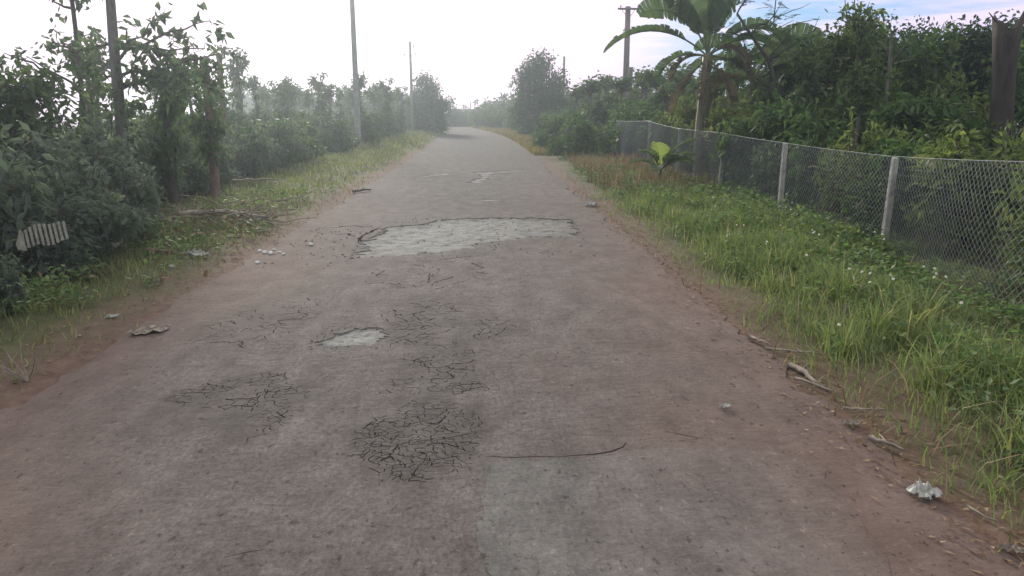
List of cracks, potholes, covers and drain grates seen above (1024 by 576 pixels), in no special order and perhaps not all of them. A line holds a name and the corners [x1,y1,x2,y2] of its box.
crack [368,255,516,395]
pothole [348,217,582,259]
pothole [313,327,390,346]
crack [347,398,626,482]
crack [165,372,310,447]
crack [198,298,321,348]
pothole [466,169,523,183]
